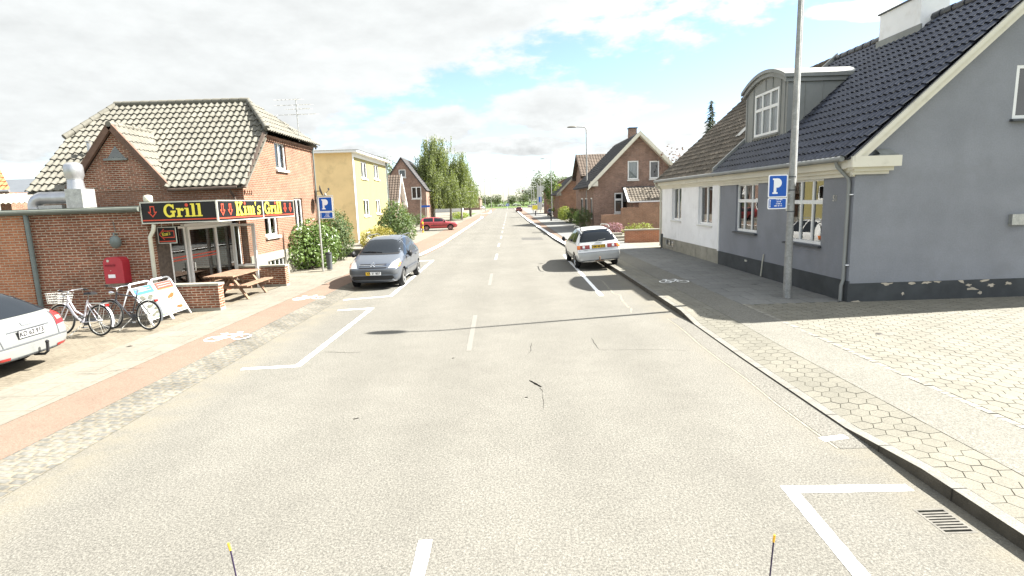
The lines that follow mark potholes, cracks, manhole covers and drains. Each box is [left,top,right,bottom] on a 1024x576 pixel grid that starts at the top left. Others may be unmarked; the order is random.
drain grate [913,508,978,534]
